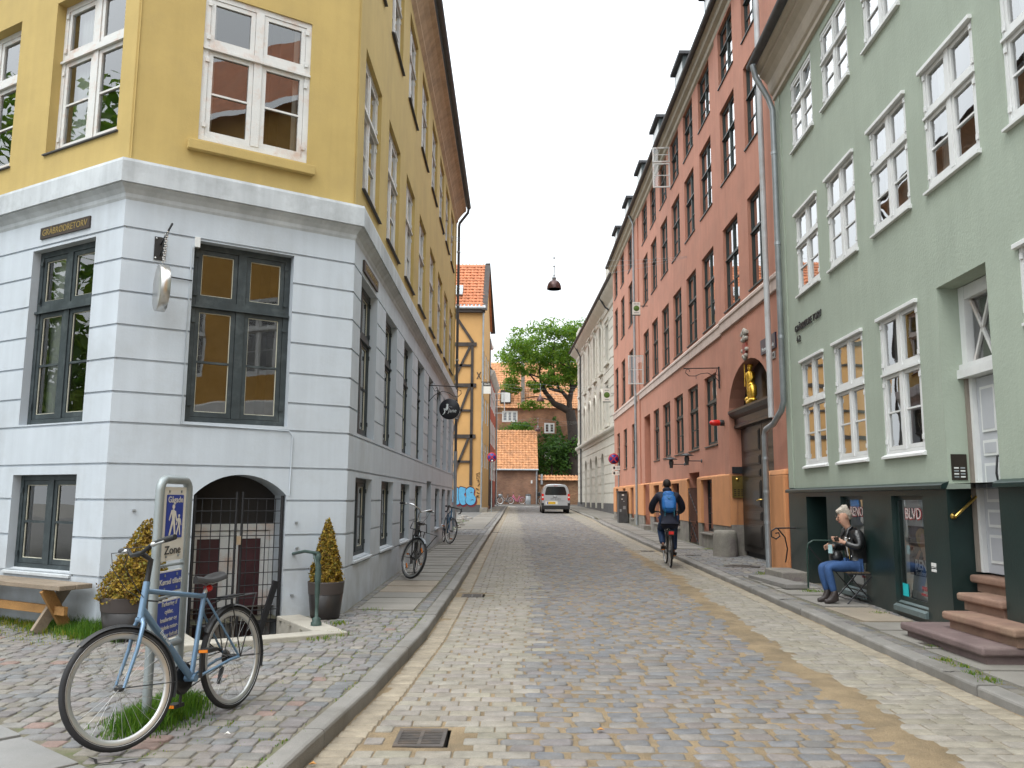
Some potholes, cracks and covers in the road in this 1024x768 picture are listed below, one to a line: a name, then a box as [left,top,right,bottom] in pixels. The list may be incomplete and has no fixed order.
drain grate [392,728,448,748]
